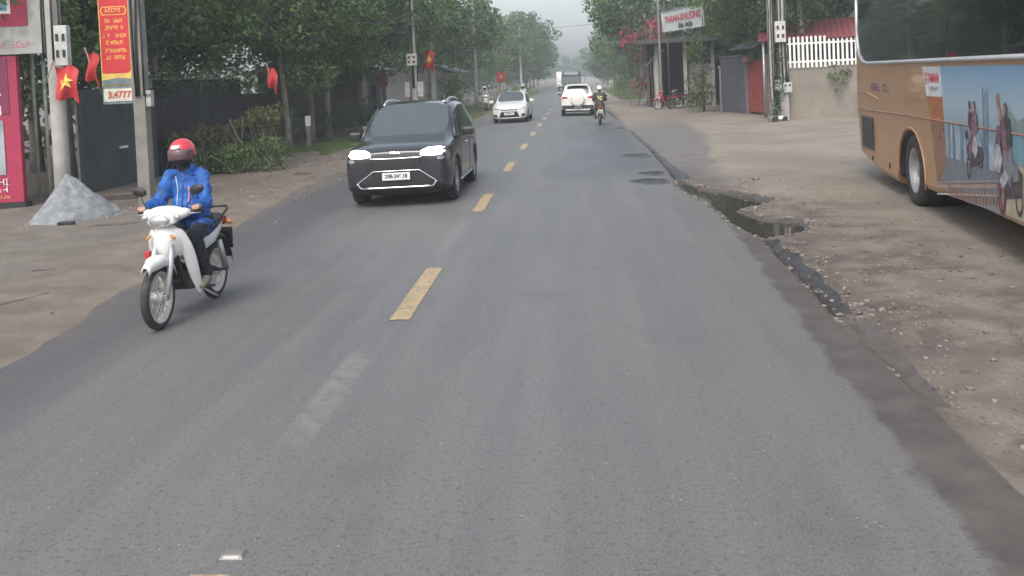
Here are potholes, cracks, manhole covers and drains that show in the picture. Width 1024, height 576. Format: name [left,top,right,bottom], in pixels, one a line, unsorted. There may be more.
pothole [763,239,852,317]
pothole [676,181,811,238]
